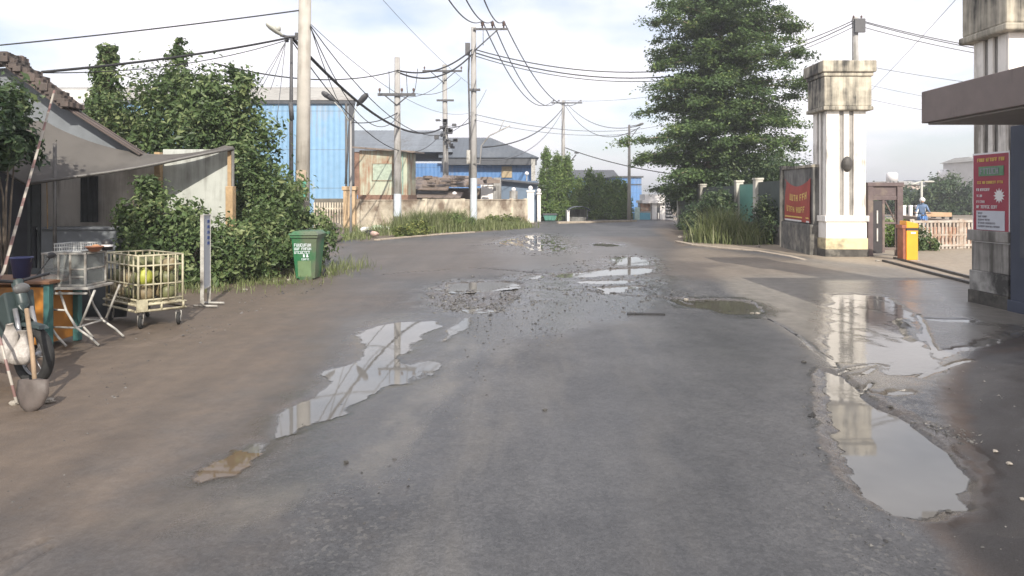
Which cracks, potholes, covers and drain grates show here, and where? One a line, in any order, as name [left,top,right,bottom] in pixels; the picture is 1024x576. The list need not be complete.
pothole [671,297,764,314]
pothole [812,368,996,524]
pothole [494,233,574,252]
pothole [426,280,526,314]
